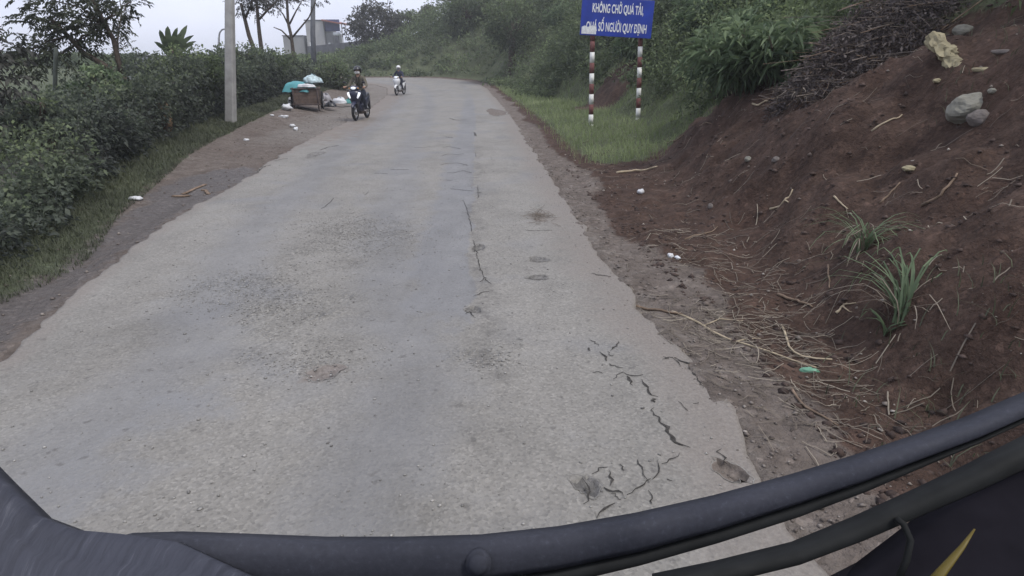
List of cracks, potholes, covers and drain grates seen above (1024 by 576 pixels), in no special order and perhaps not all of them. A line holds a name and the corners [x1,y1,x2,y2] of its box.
crack [582,340,704,517]
pothole [567,473,604,500]
pothole [710,456,755,484]
